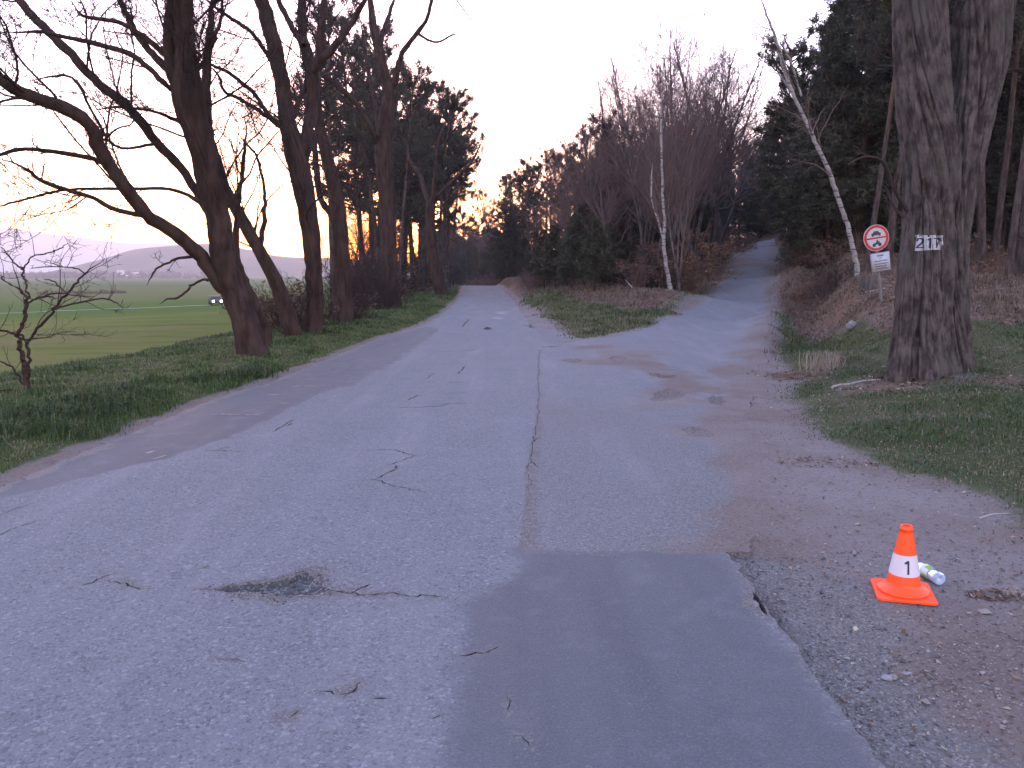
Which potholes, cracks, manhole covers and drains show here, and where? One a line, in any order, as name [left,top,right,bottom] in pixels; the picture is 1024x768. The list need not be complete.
crack [69,574,145,590]
crack [317,682,388,699]
crack [359,449,421,492]
pothole [216,572,330,598]
crack [197,567,445,598]
